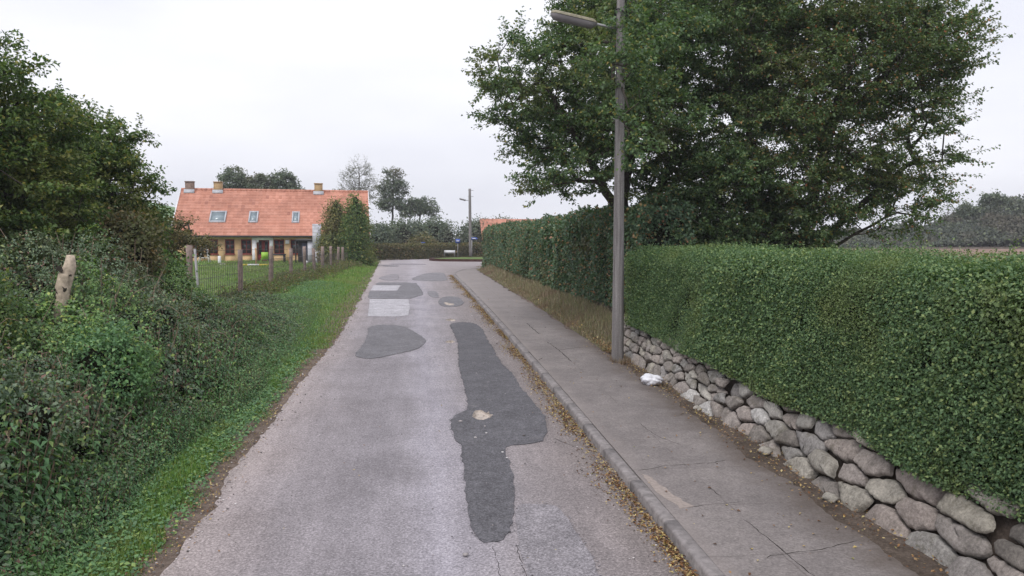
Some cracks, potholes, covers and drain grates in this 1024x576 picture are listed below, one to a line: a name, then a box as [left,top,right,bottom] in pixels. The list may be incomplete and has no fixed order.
crack [743,519,855,576]
pothole [472,410,493,420]
